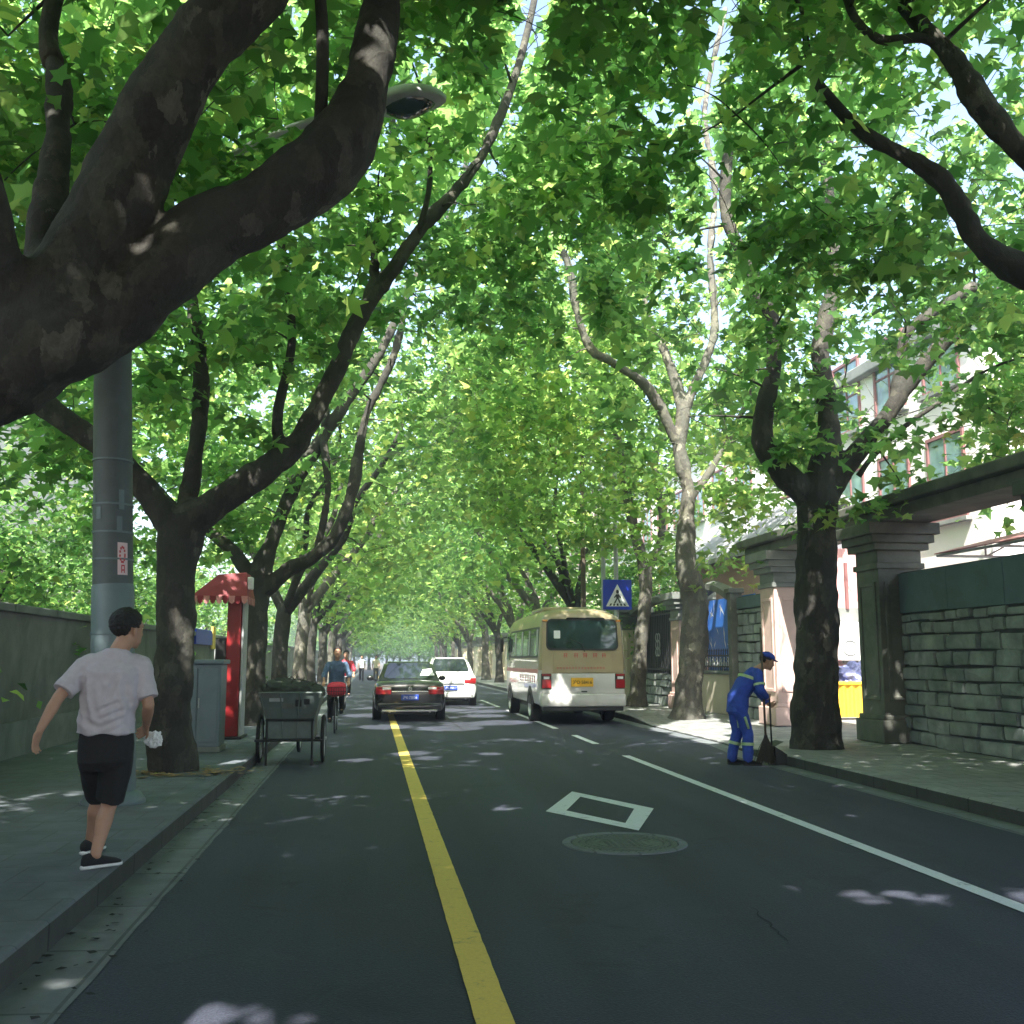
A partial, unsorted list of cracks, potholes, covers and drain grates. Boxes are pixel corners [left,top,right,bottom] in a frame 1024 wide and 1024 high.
manhole cover [562,832,688,855]
